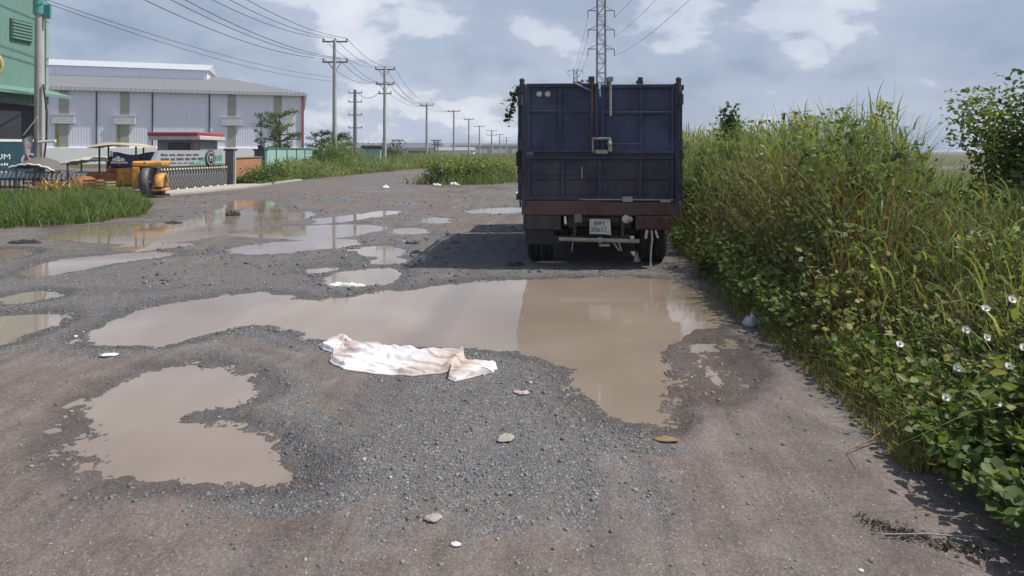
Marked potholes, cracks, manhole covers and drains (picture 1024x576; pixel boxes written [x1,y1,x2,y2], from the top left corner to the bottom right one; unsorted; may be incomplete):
pothole [346,243,415,258]
pothole [107,242,197,252]
pothole [223,237,366,256]
pothole [361,255,419,265]
pothole [33,357,329,498]
pothole [293,262,350,275]
pothole [66,273,768,435]
pothole [225,221,393,240]
pothole [40,198,325,244]
pothole [0,287,73,305]
pothole [389,226,435,234]
pothole [312,264,411,286]
